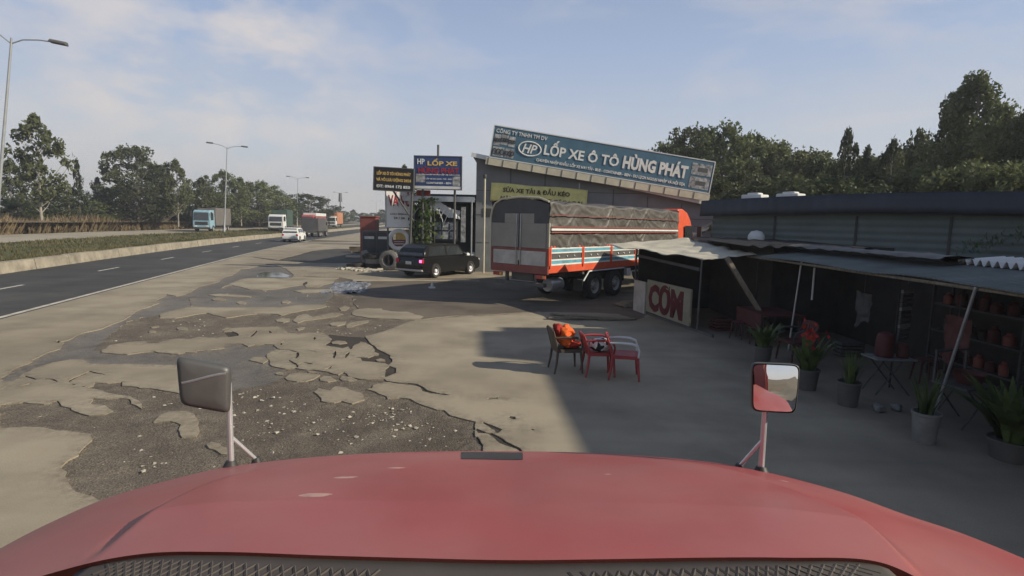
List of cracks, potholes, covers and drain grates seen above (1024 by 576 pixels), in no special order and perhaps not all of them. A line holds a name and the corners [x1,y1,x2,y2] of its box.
crack [475,416,534,451]
crack [387,381,448,395]
pothole [1,264,294,382]
pothole [325,334,392,365]
pothole [84,344,285,391]
pothole [0,368,483,500]
pothole [93,278,421,351]
